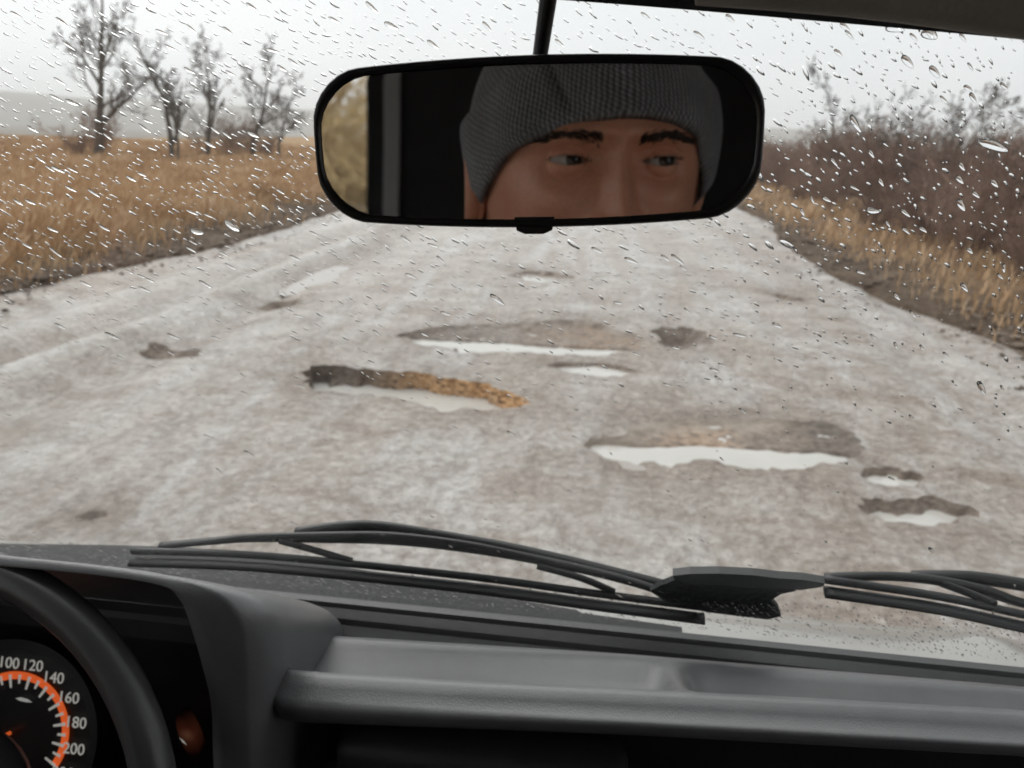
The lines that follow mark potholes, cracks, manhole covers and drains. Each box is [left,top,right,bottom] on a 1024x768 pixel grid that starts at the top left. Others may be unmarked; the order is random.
pothole [545,362,646,376]
pothole [650,326,715,350]
pothole [860,466,932,487]
pothole [395,319,655,352]
pothole [76,509,108,520]
pothole [139,341,202,360]
pothole [510,271,576,279]
pothole [857,495,980,526]
pothole [574,418,866,460]
pothole [257,299,303,312]
pothole [299,365,530,408]
